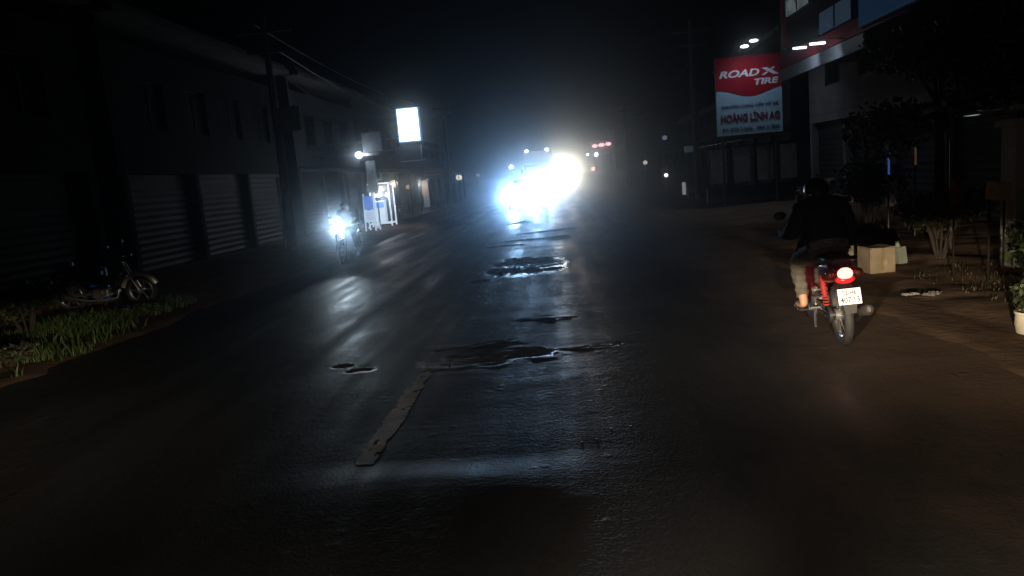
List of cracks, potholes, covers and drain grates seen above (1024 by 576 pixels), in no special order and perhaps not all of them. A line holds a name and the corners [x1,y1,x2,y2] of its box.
pothole [476,256,570,279]
pothole [414,350,514,369]
pothole [492,346,559,361]
